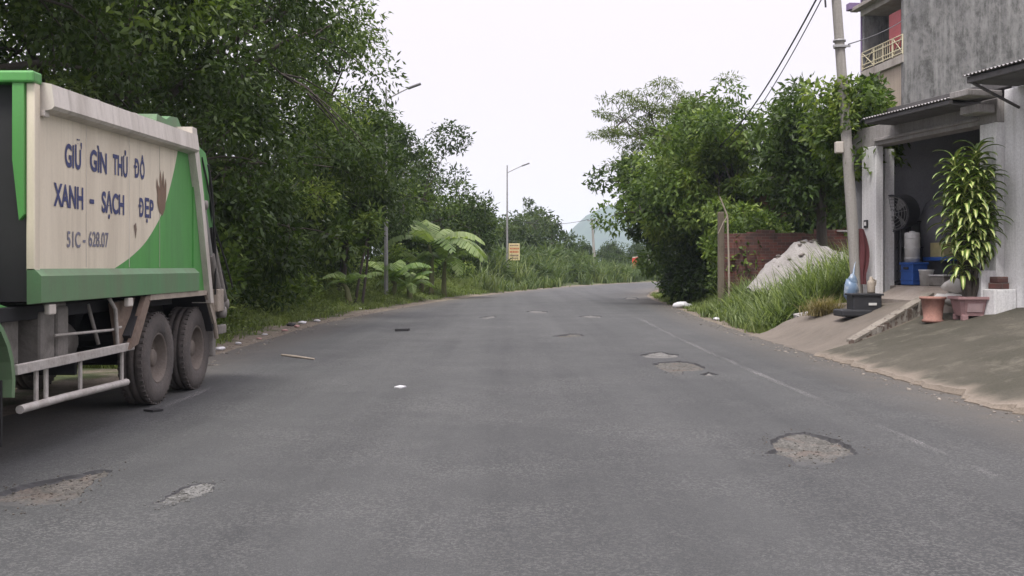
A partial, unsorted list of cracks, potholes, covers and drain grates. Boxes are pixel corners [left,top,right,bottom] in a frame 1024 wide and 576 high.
pothole [143,478,225,510]
pothole [0,461,126,515]
pothole [651,361,708,379]
pothole [753,428,871,472]
